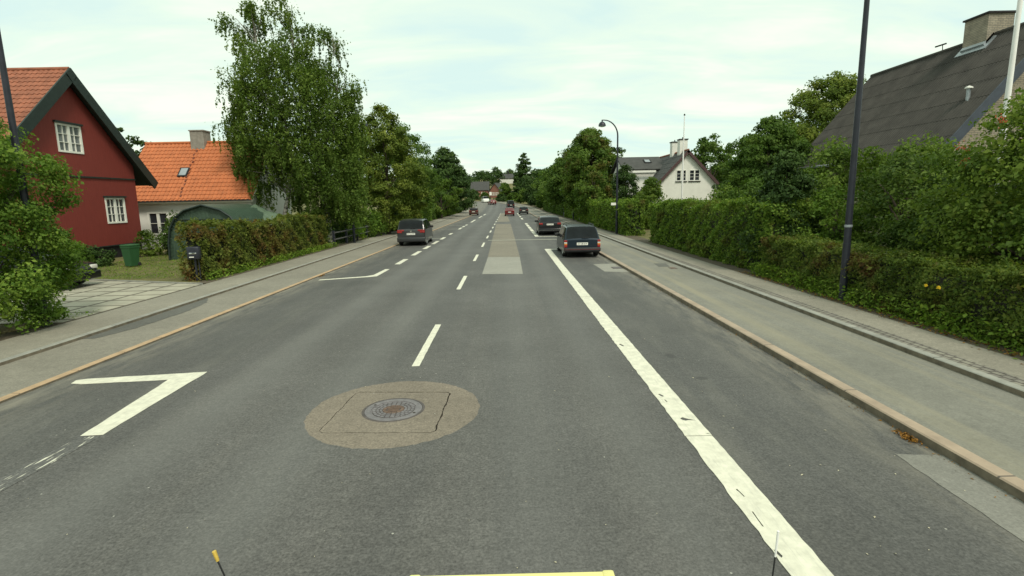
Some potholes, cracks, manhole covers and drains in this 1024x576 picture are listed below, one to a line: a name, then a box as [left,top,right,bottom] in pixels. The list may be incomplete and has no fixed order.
crack [319,392,451,433]
manhole cover [362,398,425,422]
